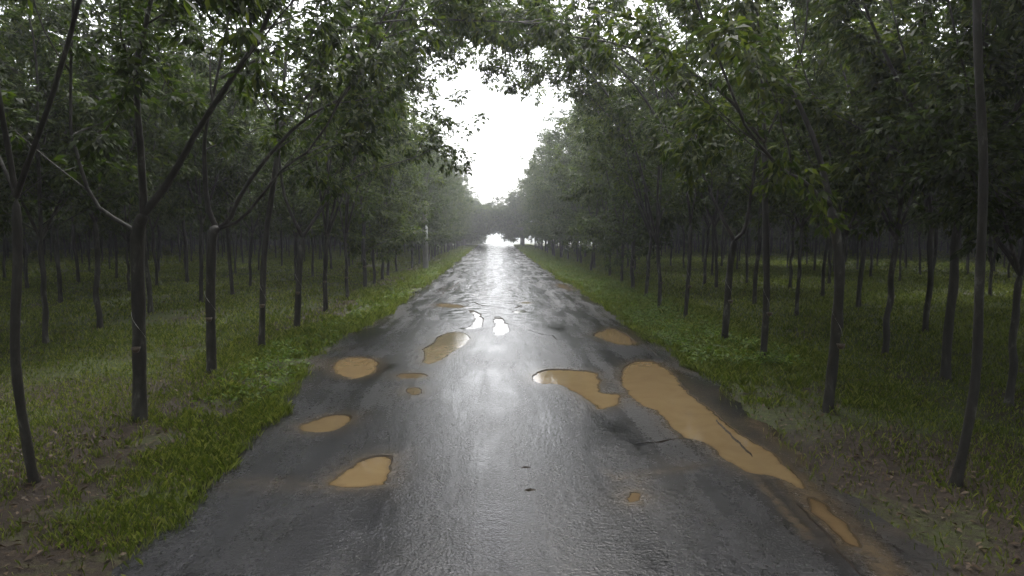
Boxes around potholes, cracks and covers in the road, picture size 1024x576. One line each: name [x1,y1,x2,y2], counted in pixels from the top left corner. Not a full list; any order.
pothole [627,492,641,502]
pothole [492,317,510,336]
pothole [620,361,807,489]
pothole [332,357,380,379]
pothole [328,455,394,488]
pothole [806,496,863,551]
pothole [422,332,470,364]
